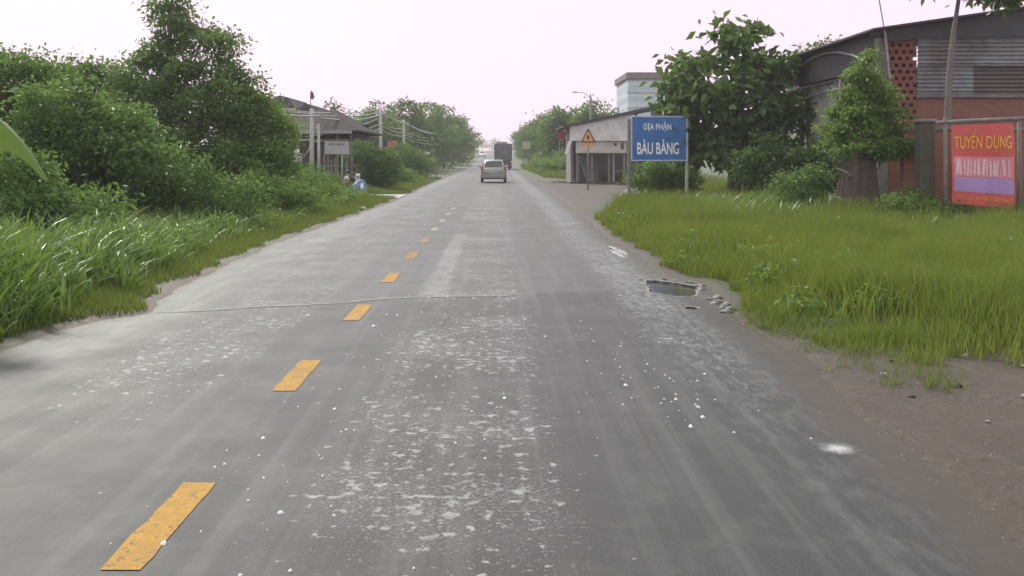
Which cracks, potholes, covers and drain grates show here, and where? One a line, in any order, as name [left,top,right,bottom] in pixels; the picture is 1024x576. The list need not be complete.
pothole [643,279,703,297]
